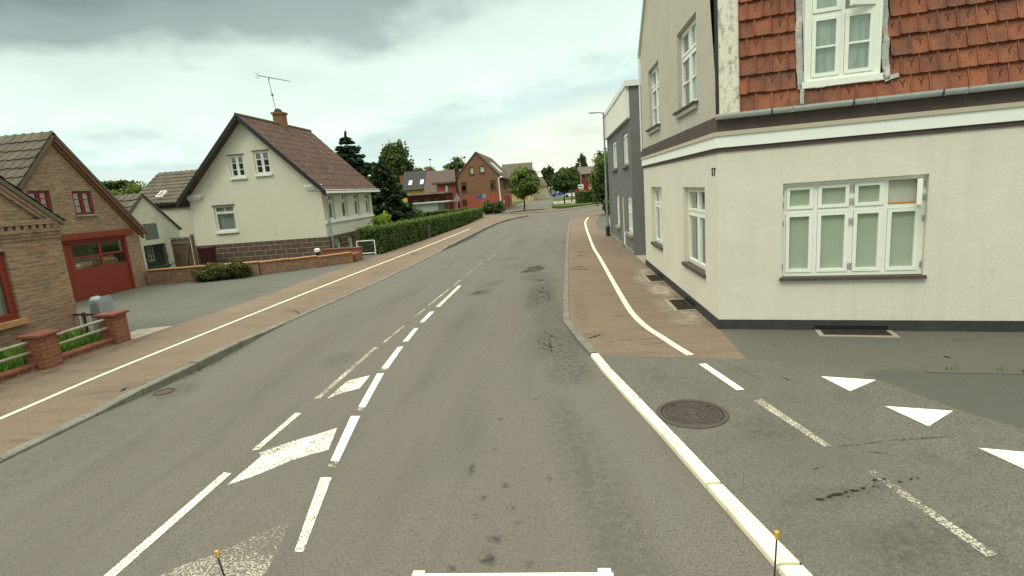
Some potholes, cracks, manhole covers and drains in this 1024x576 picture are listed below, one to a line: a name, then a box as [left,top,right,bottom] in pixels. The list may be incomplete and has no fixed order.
manhole cover [153,388,176,396]
drain grate [642,274,664,283]
drain grate [664,298,696,312]
manhole cover [656,399,729,429]
drain grate [815,329,900,338]
